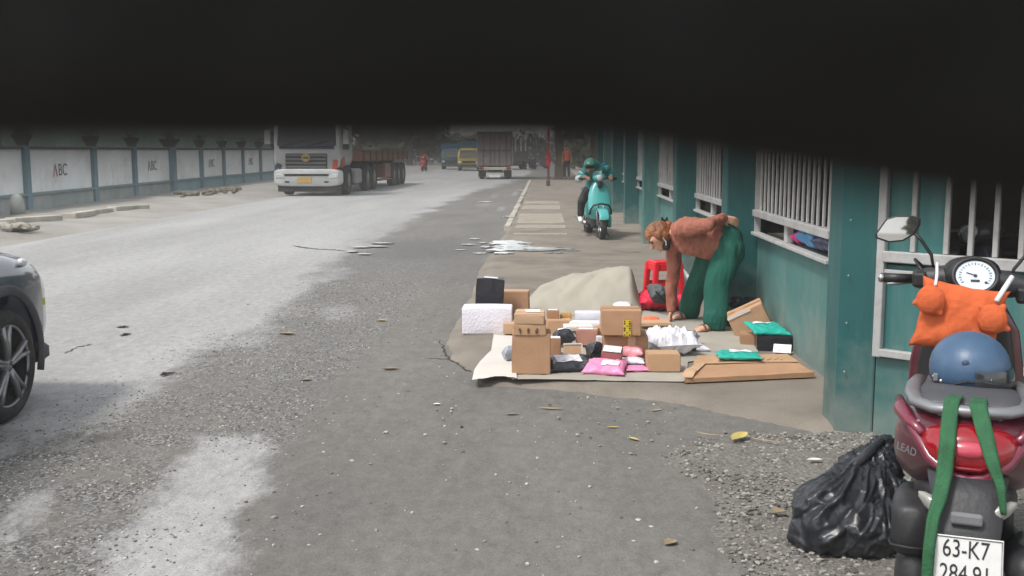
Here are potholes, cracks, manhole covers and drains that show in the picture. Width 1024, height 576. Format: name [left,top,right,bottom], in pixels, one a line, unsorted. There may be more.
crack [430,340,470,372]
